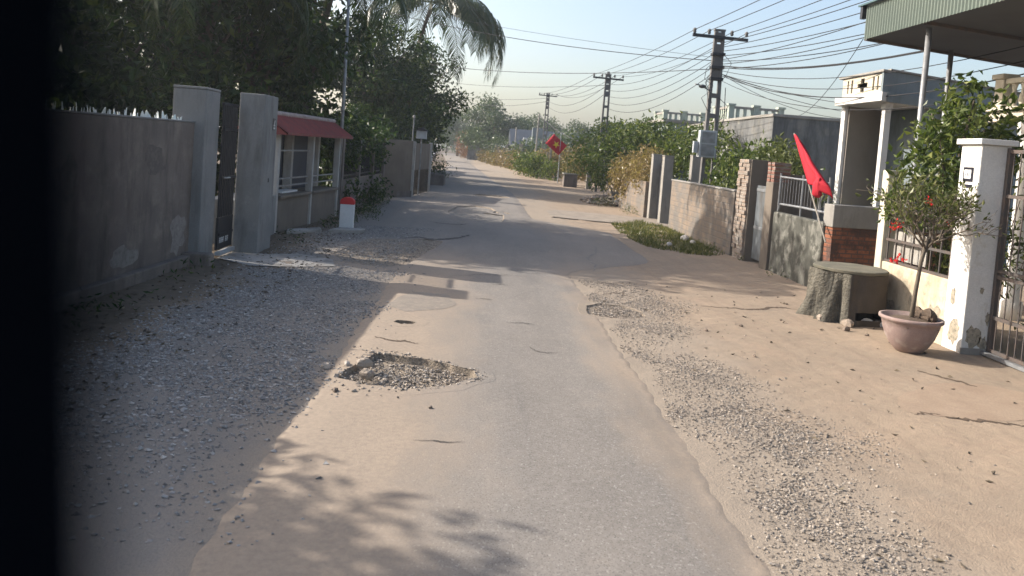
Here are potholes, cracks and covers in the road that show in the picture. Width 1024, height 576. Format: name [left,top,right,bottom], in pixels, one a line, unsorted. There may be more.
crack [407,221,469,240]
pothole [577,302,655,321]
crack [916,411,1024,426]
pothole [293,345,496,398]
